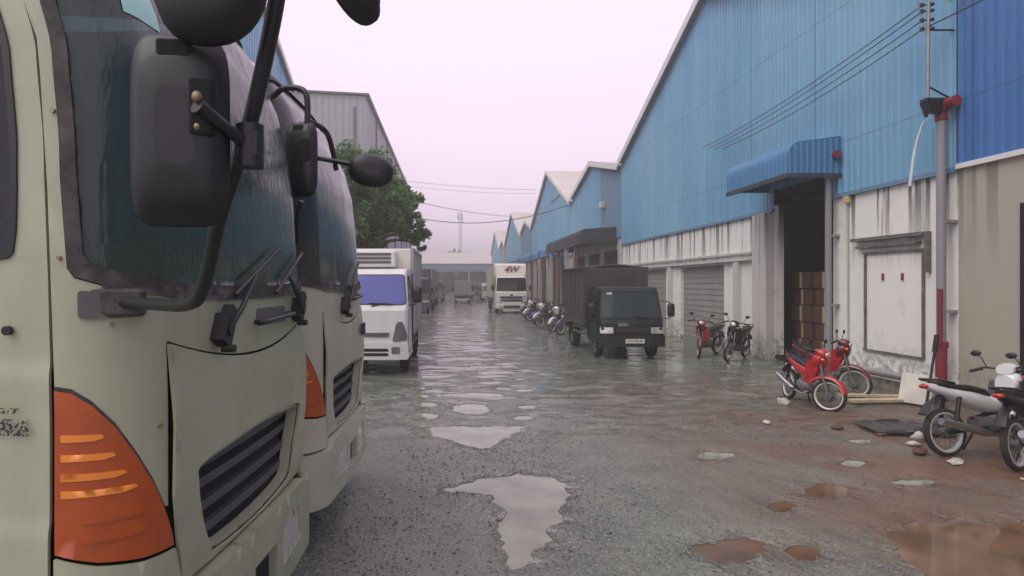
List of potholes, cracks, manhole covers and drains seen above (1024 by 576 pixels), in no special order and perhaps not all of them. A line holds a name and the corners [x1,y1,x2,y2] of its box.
pothole [689,537,768,564]
pothole [784,545,823,561]
pothole [451,403,491,414]
pothole [441,472,572,570]
pothole [767,502,797,512]
pothole [411,425,525,449]
pothole [886,519,1024,576]
pothole [696,451,735,460]
pothole [804,483,849,498]
